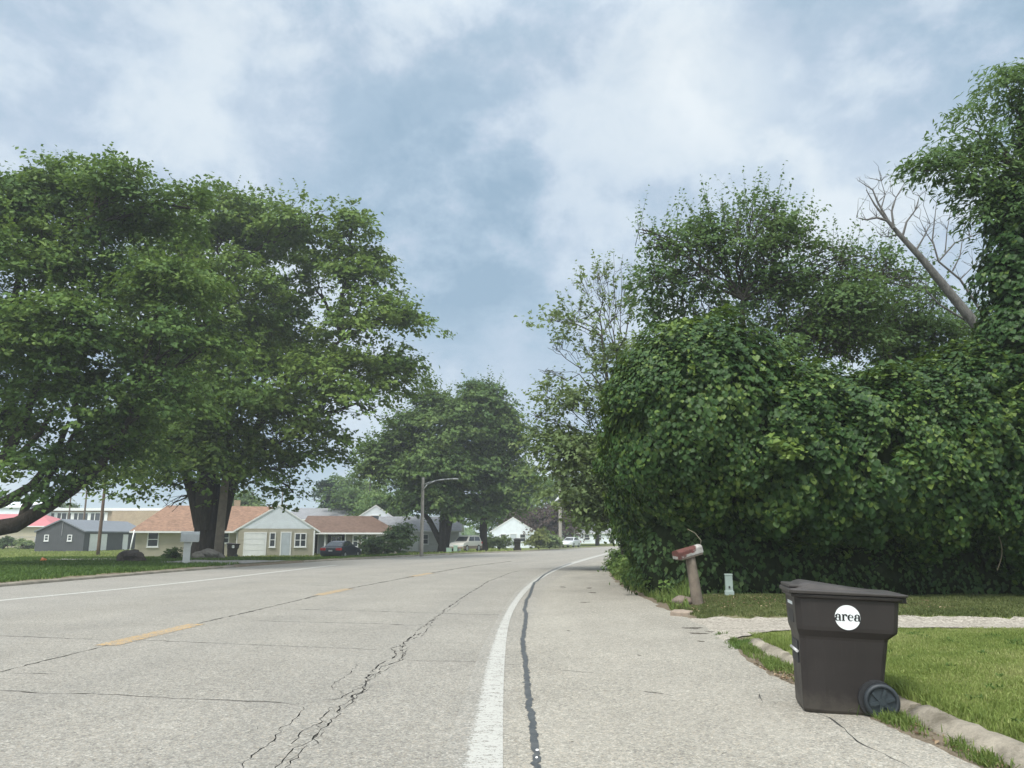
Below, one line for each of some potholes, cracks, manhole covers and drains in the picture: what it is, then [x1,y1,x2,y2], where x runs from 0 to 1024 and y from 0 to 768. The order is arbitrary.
crack [820,714,911,768]
crack [14,572,589,768]
